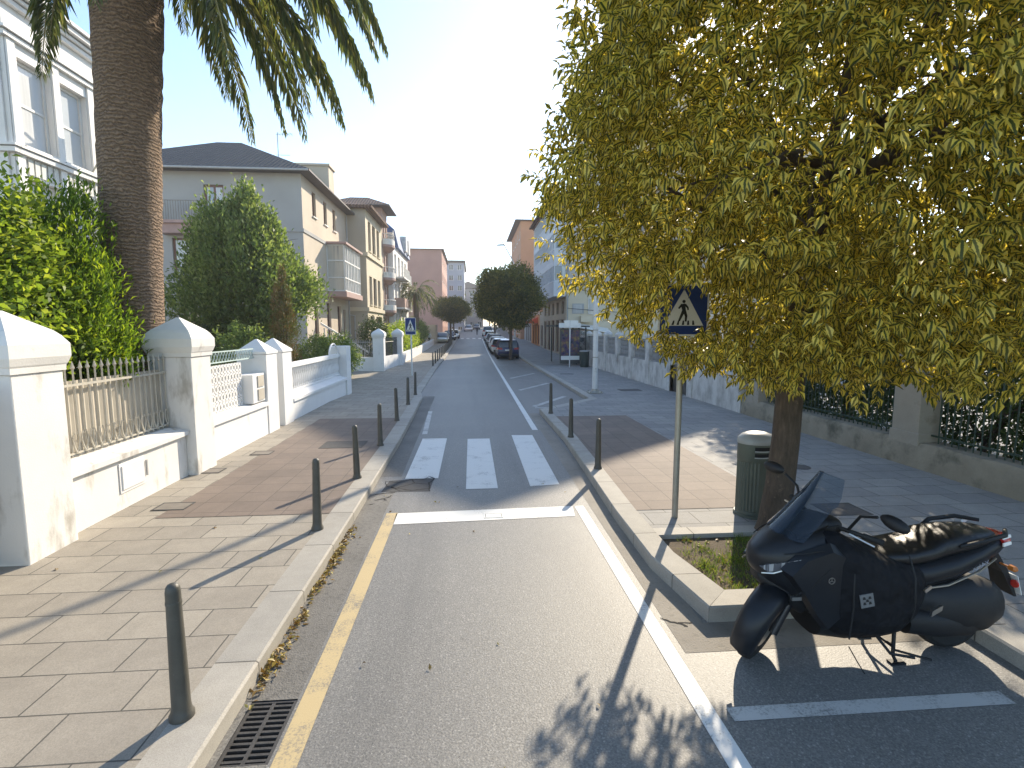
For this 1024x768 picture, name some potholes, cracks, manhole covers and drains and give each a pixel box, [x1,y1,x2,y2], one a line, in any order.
manhole cover [150,502,196,511]
manhole cover [811,503,874,516]
manhole cover [318,441,368,449]
drain grate [214,699,298,768]
